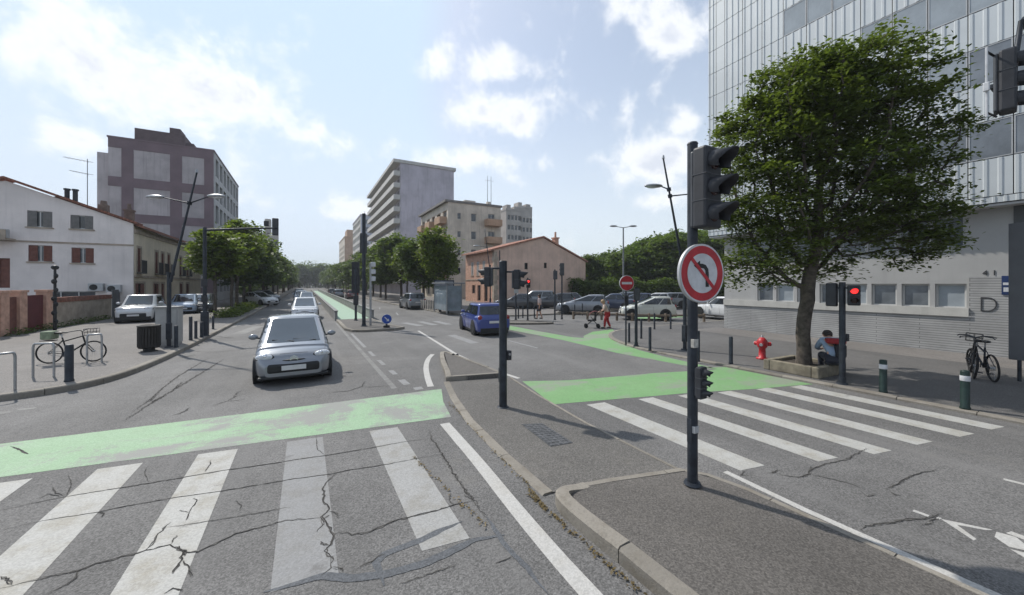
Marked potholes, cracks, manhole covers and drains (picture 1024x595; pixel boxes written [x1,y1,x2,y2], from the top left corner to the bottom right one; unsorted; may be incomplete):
crack [126,336,252,420]
crack [1,432,486,594]
crack [772,448,934,496]
crack [861,513,943,530]
